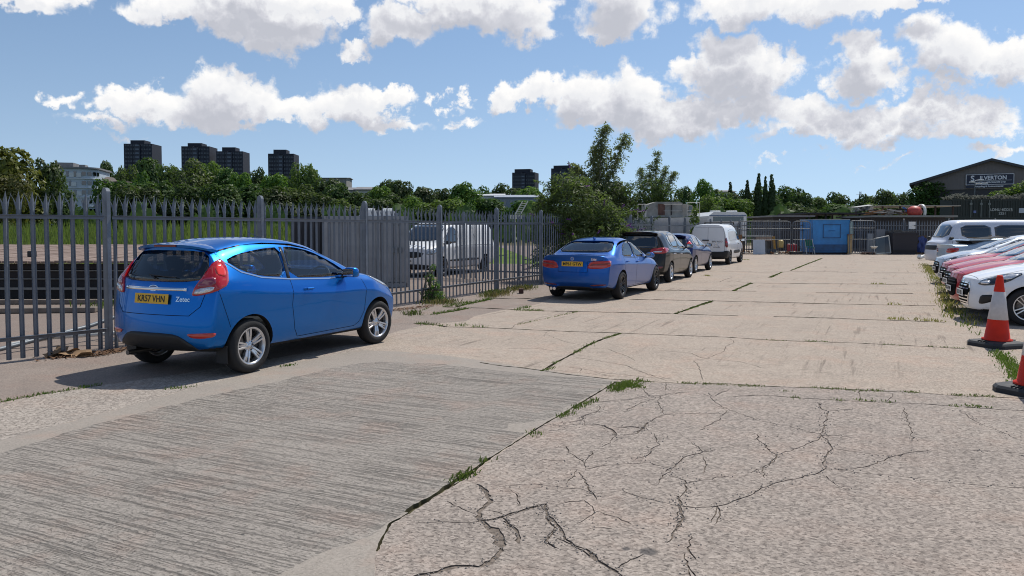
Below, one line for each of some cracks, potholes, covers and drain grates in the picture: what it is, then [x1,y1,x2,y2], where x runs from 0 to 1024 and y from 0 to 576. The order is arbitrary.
crack [414,383,1023,576]
